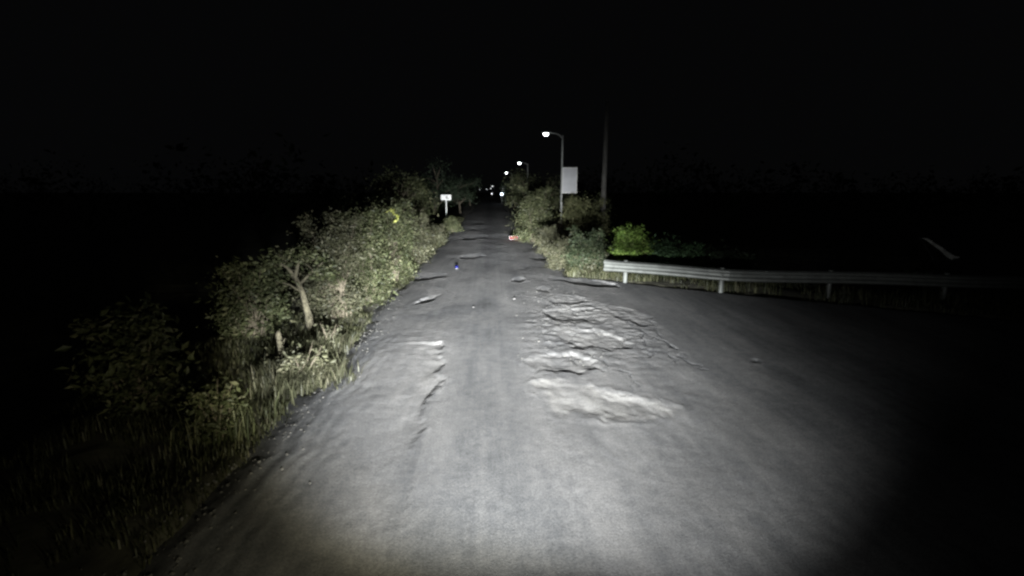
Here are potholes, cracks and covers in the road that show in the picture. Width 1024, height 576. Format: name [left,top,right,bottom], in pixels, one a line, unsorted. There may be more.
pothole [405,287,446,308]
pothole [412,273,447,281]
crack [584,319,706,401]
pothole [597,306,658,327]
pothole [549,326,636,353]
pothole [538,294,591,305]
pothole [542,306,616,324]
pothole [548,274,621,288]
pothole [522,352,601,375]
pothole [529,376,682,423]
